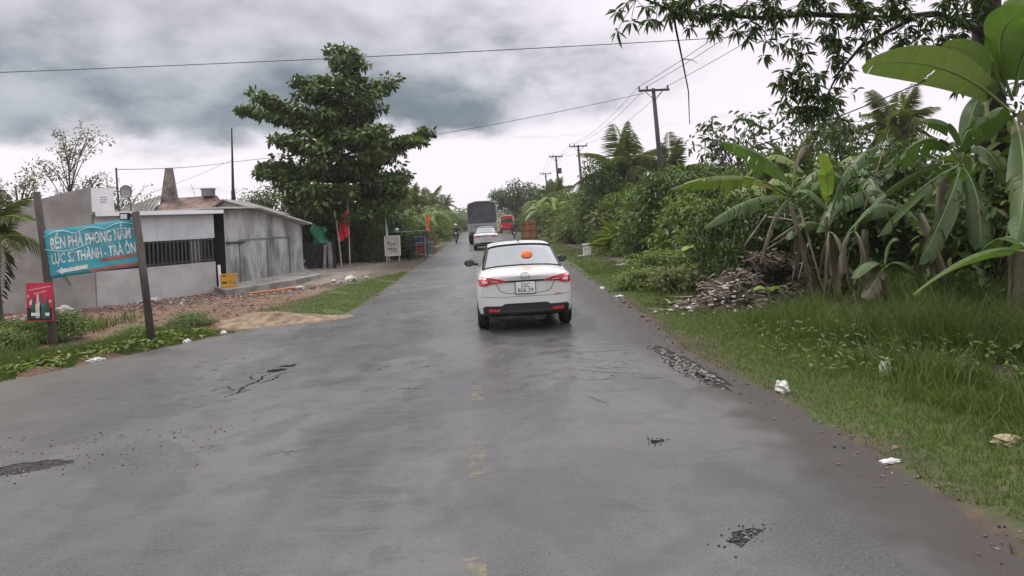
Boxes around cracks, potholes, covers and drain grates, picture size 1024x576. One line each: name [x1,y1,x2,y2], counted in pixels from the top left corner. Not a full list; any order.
pothole [707,523,775,558]
pothole [646,340,737,392]
crack [224,371,295,398]
